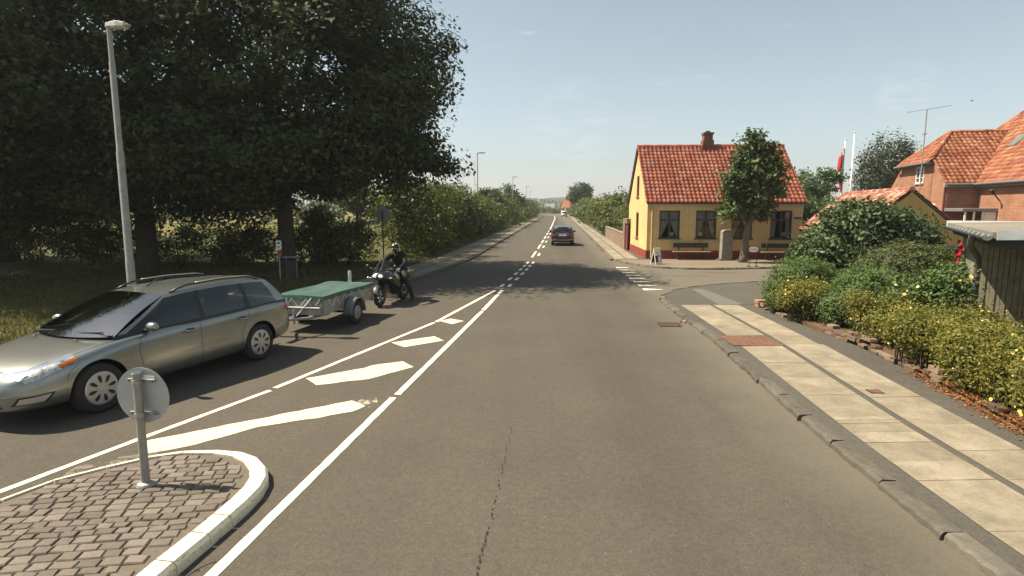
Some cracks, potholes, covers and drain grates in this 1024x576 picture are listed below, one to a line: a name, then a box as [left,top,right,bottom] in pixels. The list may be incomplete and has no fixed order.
manhole cover [720,336,784,346]
